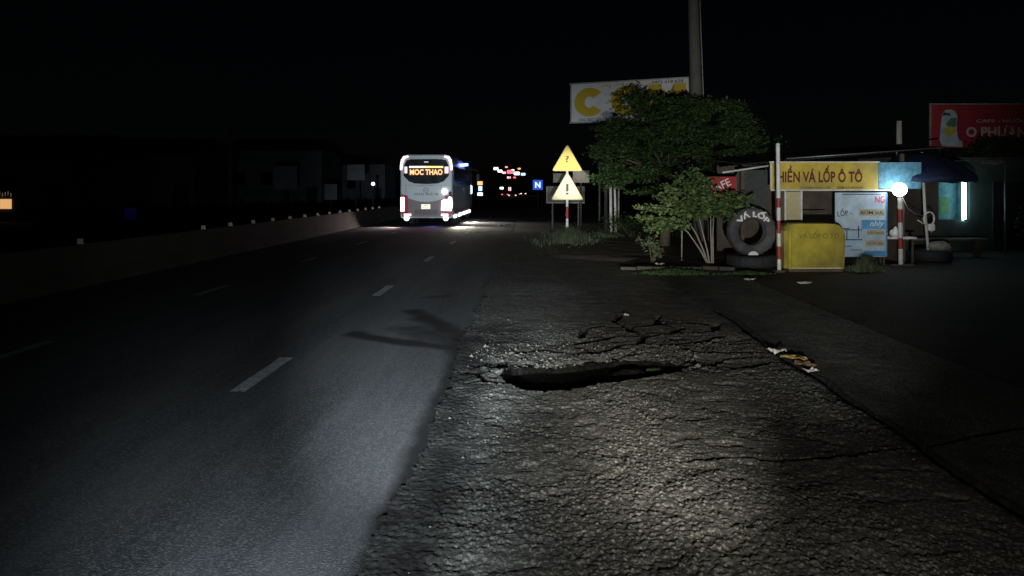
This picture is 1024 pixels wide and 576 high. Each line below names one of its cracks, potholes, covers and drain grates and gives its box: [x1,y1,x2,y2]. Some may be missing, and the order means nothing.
pothole [500,360,688,392]
crack [464,313,776,384]
crack [671,427,1024,463]
